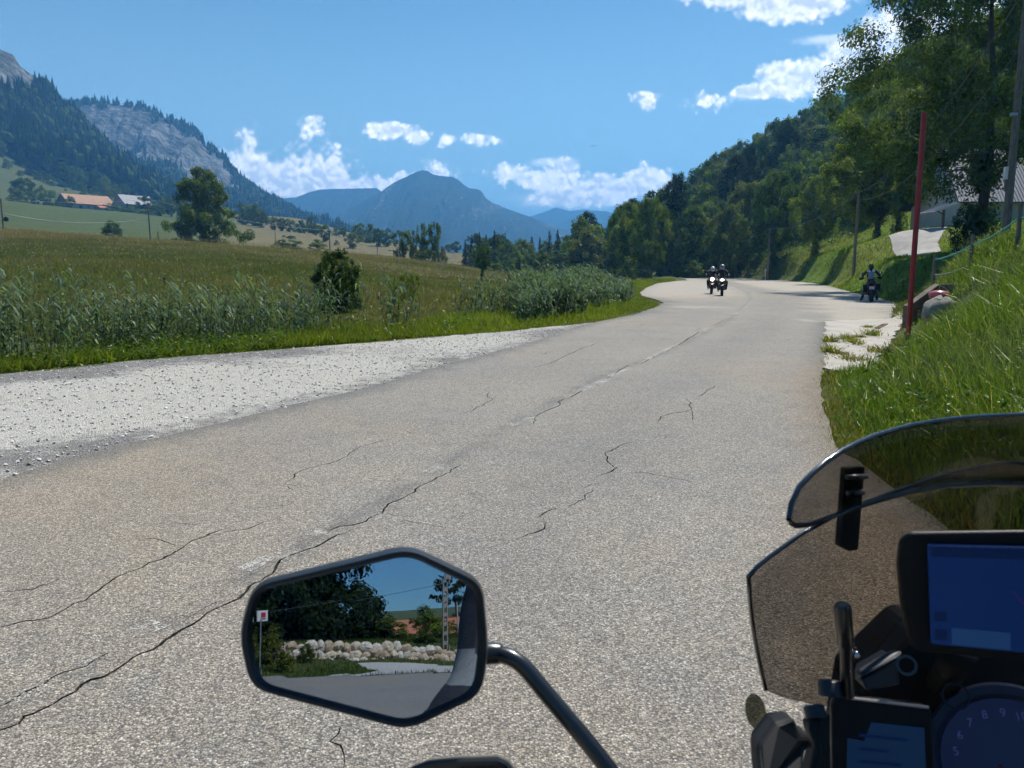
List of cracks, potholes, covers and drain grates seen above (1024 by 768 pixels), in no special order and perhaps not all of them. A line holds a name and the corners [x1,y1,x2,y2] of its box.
crack [0,465,460,731]
